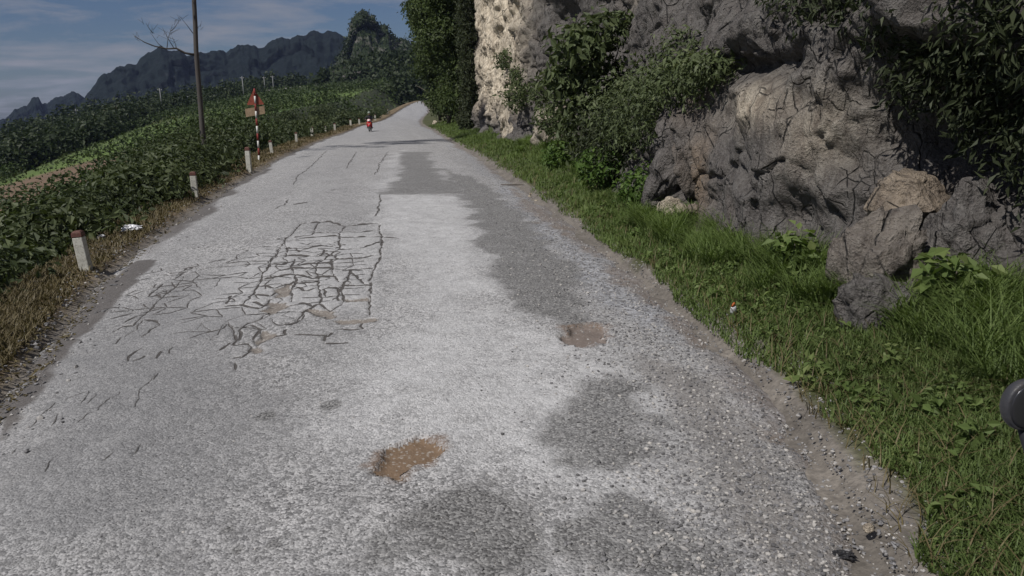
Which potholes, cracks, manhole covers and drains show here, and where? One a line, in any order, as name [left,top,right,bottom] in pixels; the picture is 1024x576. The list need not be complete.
pothole [373,439,445,481]
pothole [560,326,609,348]
crack [29,195,395,429]
